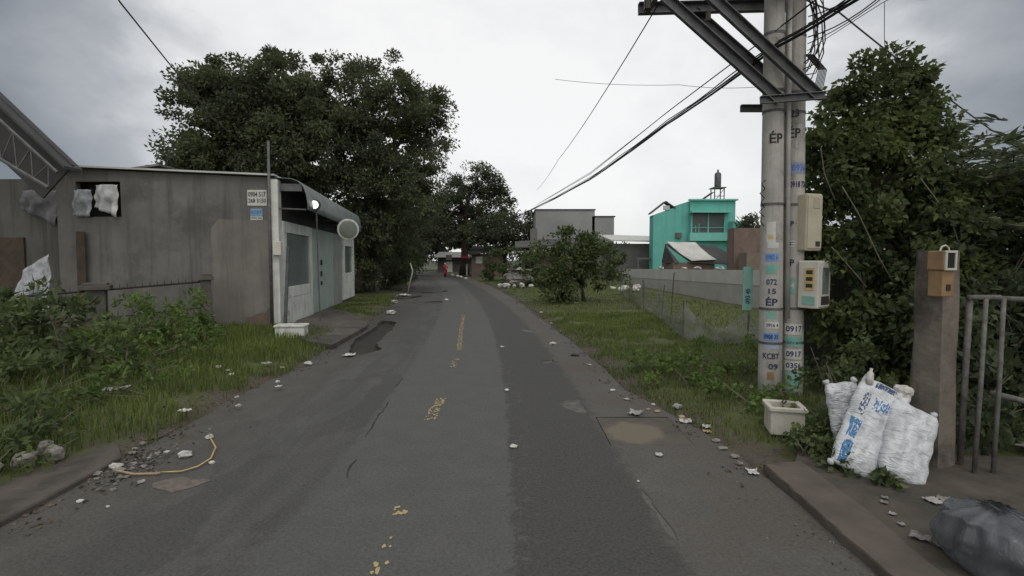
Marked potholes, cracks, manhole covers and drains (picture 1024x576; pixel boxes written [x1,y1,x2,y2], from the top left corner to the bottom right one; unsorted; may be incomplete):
crack [347,378,403,478]
crack [641,489,678,541]
pothole [349,321,396,355]
